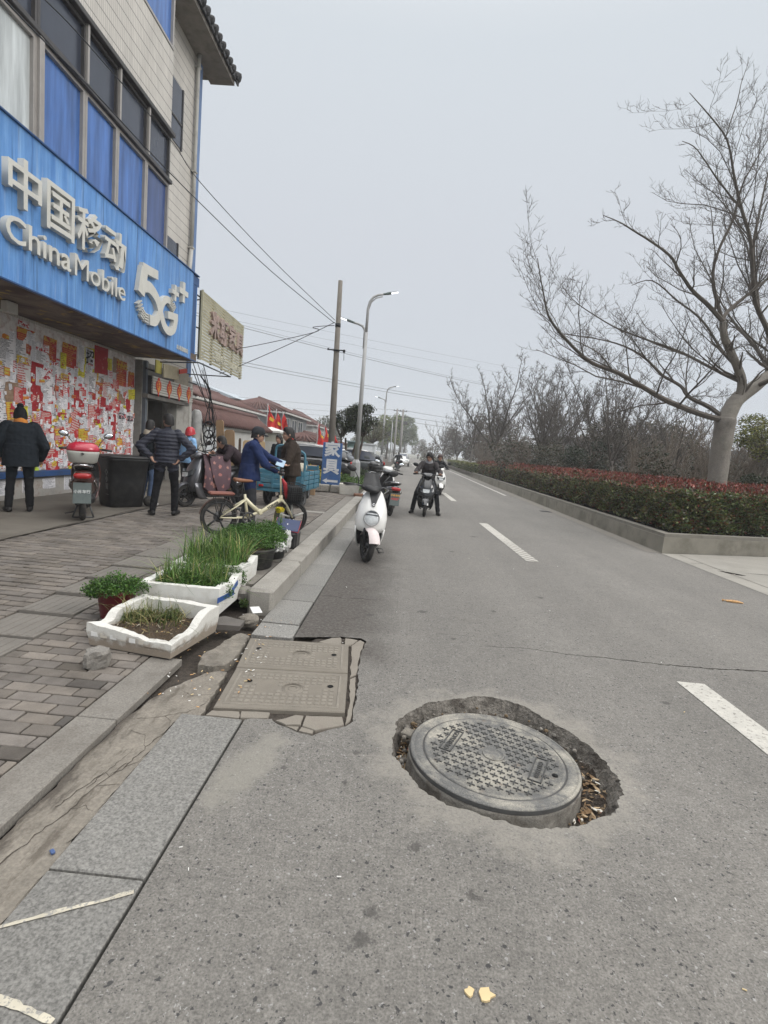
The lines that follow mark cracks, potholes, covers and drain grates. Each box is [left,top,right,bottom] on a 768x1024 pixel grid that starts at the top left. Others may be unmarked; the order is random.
manhole cover [400,713,582,829]
manhole cover [236,638,349,674]
crack [493,646,768,672]
manhole cover [213,668,348,717]
